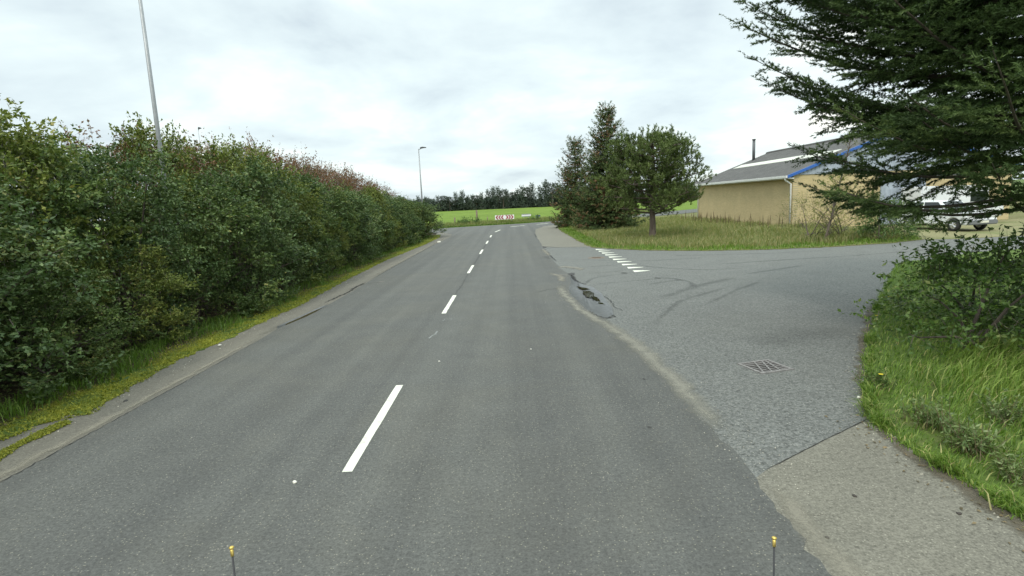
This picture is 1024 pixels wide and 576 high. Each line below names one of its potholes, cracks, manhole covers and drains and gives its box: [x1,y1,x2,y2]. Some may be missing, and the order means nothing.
pothole [569,275,613,318]
